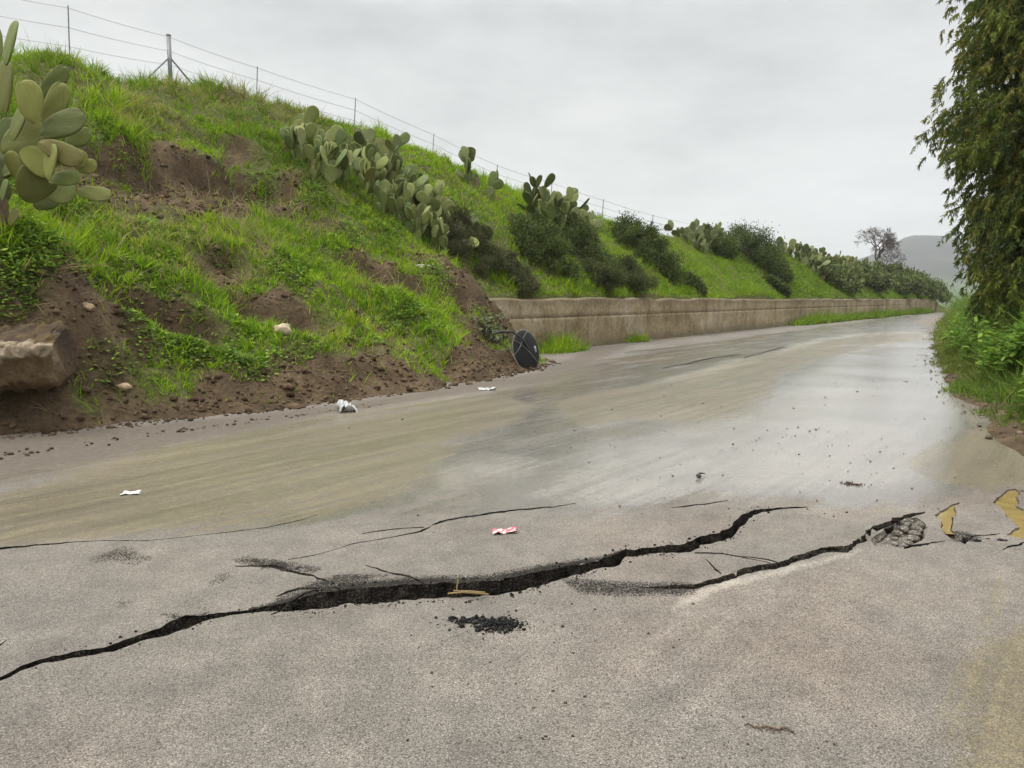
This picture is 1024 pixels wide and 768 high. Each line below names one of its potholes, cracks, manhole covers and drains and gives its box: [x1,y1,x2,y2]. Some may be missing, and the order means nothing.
pothole [935,502,1008,544]
crack [0,500,944,681]
pothole [871,517,927,549]
pothole [993,489,1024,536]
